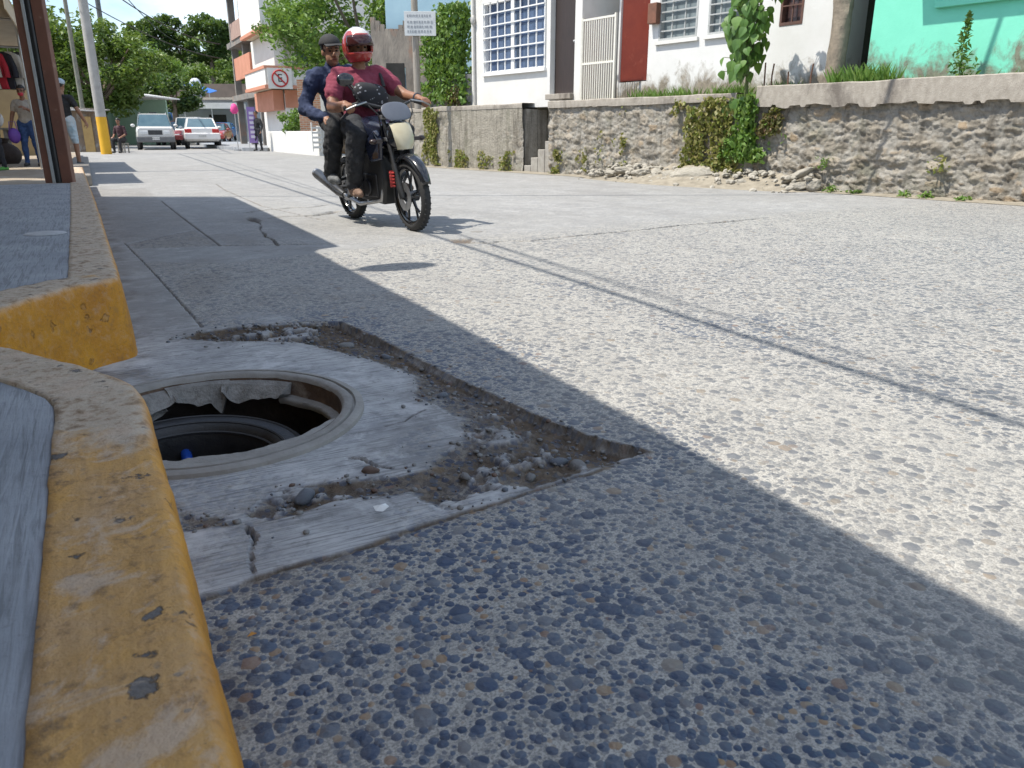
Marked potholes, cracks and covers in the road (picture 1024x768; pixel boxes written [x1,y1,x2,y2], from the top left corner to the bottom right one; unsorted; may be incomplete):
manhole cover [132,369,364,480]
crack [244,204,343,246]
pothole [167,321,653,534]
crack [240,526,263,581]
